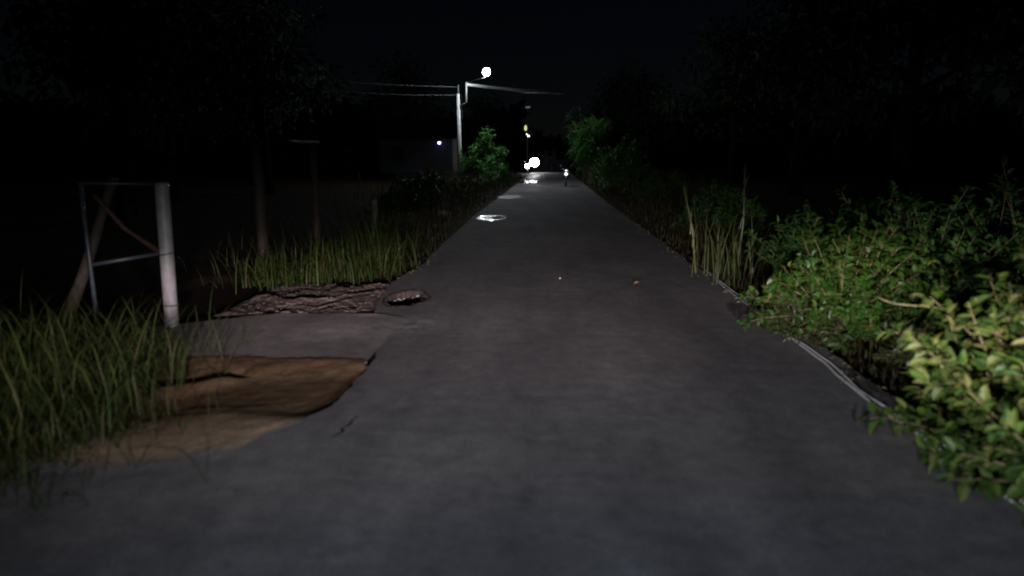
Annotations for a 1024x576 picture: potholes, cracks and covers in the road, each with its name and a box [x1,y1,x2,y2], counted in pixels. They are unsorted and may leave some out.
crack [315,411,373,442]
pothole [0,356,366,474]
